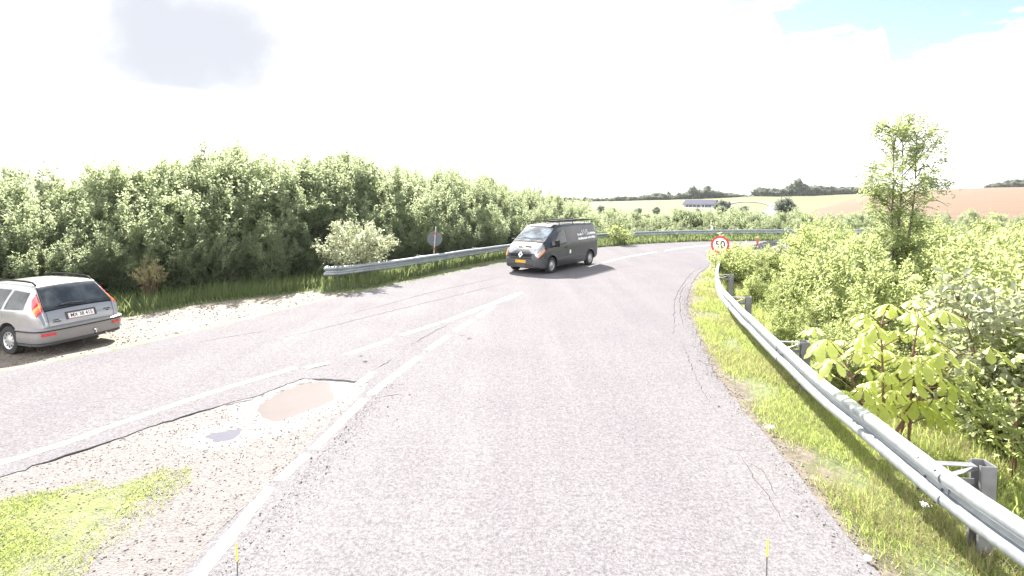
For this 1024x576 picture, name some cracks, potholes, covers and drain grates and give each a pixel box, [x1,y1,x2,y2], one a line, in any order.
crack [731,449,787,527]
crack [0,364,330,478]
pothole [253,381,360,428]
pothole [201,426,248,443]
